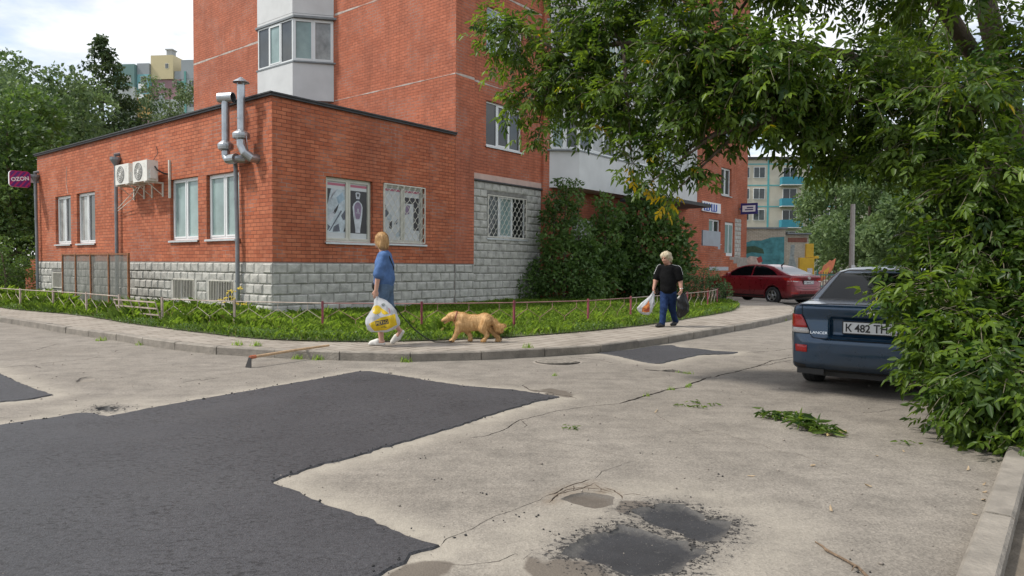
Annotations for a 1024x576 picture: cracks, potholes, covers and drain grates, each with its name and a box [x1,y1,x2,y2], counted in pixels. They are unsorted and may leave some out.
pothole [561,492,615,509]
crack [468,348,827,503]
pothole [631,503,732,542]
pothole [561,524,707,576]
